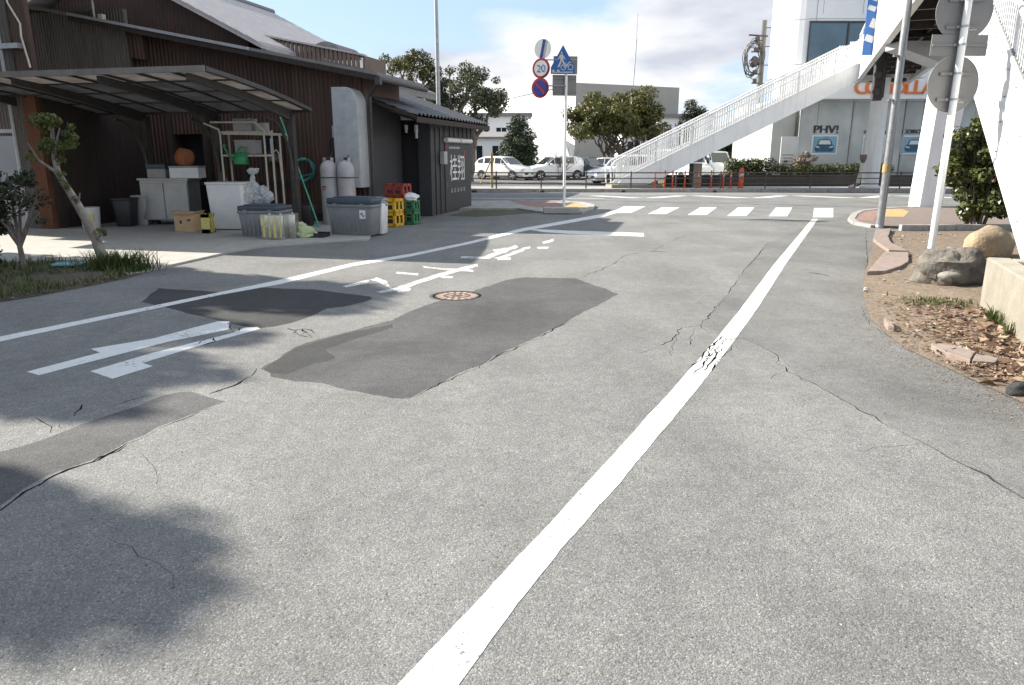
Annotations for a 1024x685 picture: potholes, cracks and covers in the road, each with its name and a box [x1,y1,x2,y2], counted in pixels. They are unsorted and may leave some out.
crack [641,242,769,374]
manhole cover [429,291,485,301]
crack [0,396,209,588]
crack [741,338,1024,499]
